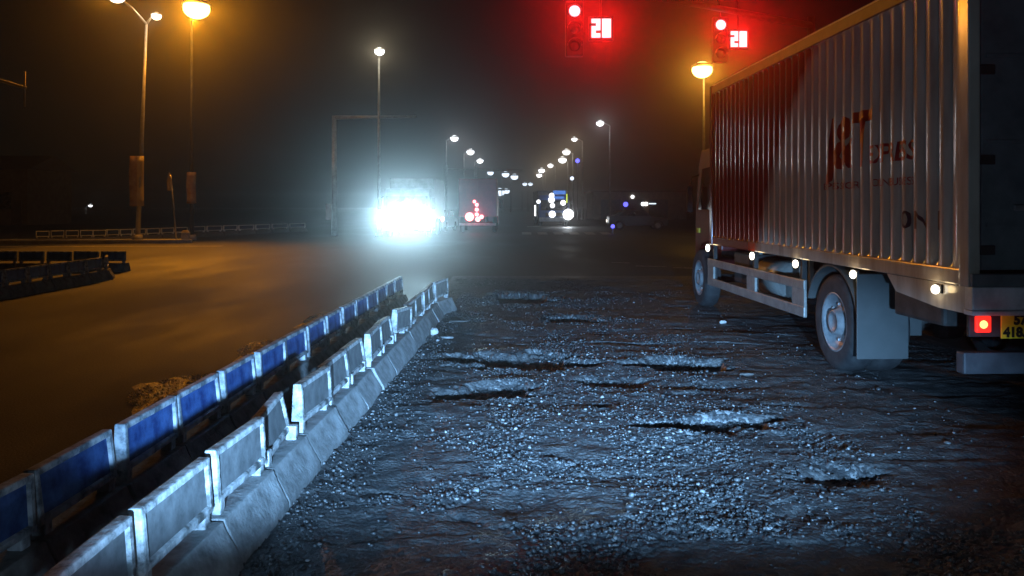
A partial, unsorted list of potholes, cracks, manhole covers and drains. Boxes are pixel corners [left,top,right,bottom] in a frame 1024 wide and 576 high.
pothole [609,354,740,373]
pothole [418,348,616,374]
pothole [774,458,899,490]
pothole [470,291,574,304]
pothole [419,378,554,404]
pothole [620,411,814,437]
pothole [530,313,609,323]
pothole [571,374,675,389]
